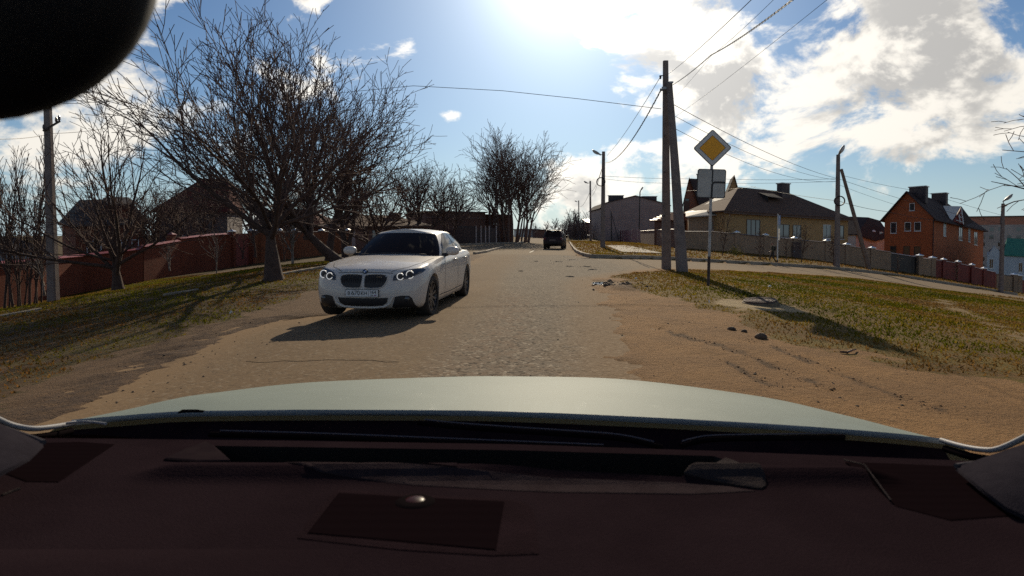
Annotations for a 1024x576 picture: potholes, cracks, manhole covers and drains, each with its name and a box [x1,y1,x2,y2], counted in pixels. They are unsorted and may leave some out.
manhole cover [742,297,780,307]
